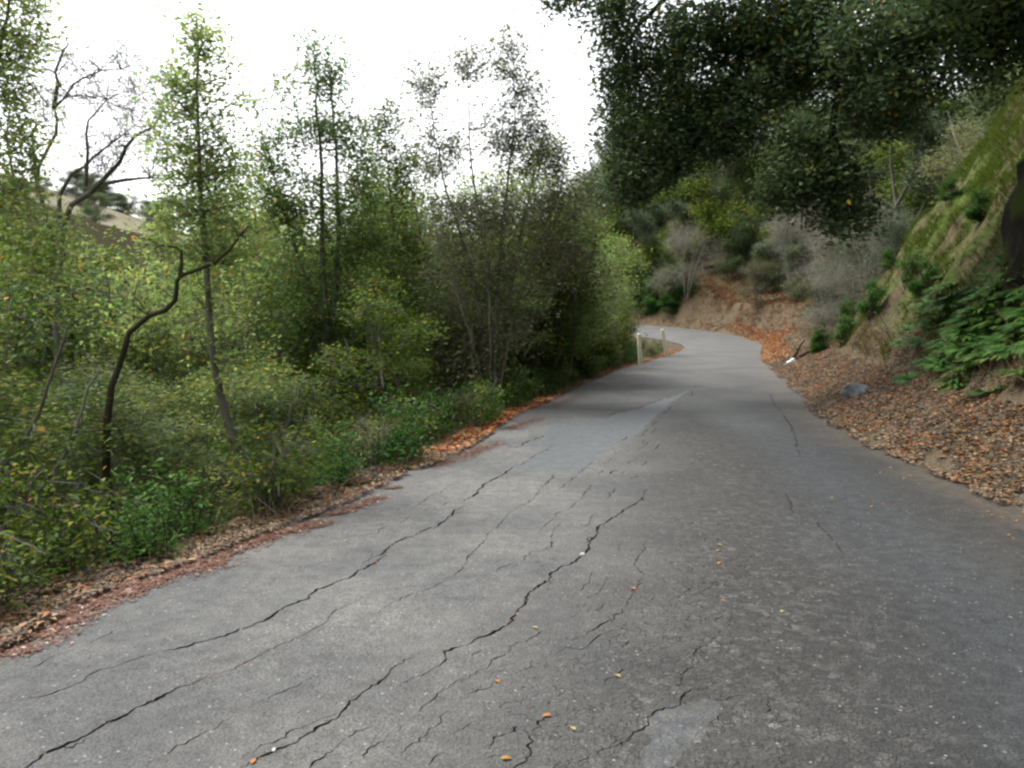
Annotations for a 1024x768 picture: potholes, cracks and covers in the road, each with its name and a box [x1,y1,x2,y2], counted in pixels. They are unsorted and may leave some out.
crack [17,445,552,768]
crack [242,386,759,768]
